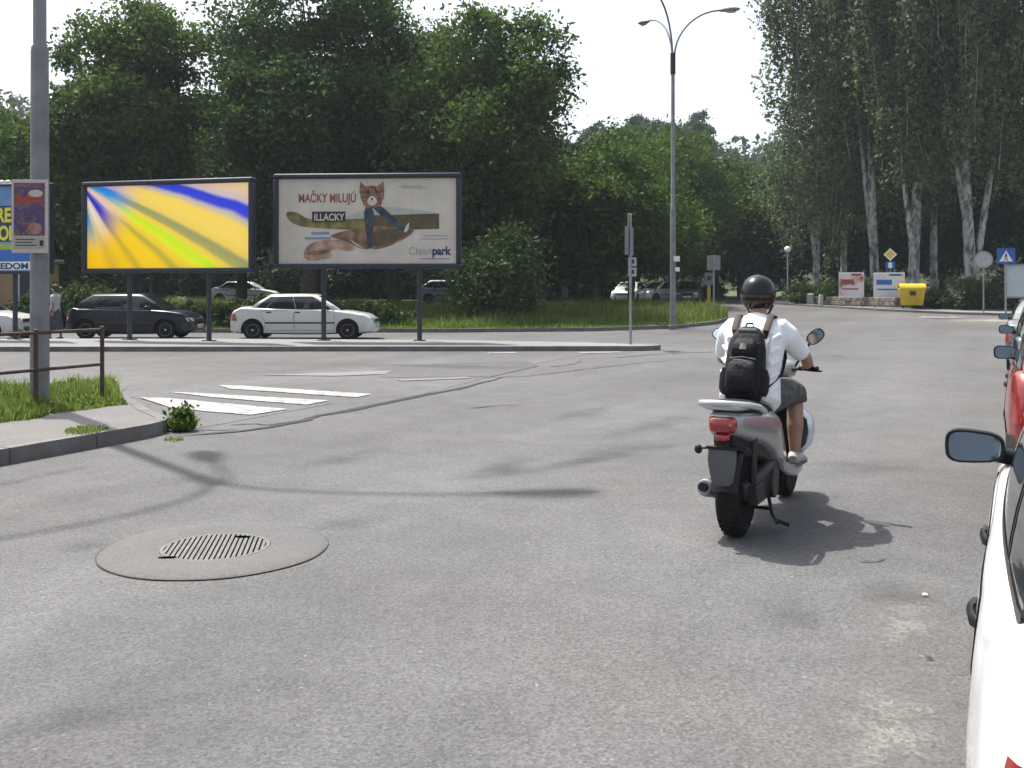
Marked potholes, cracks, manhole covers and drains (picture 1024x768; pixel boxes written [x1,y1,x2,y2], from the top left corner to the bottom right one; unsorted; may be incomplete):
manhole cover [95,521,329,580]
